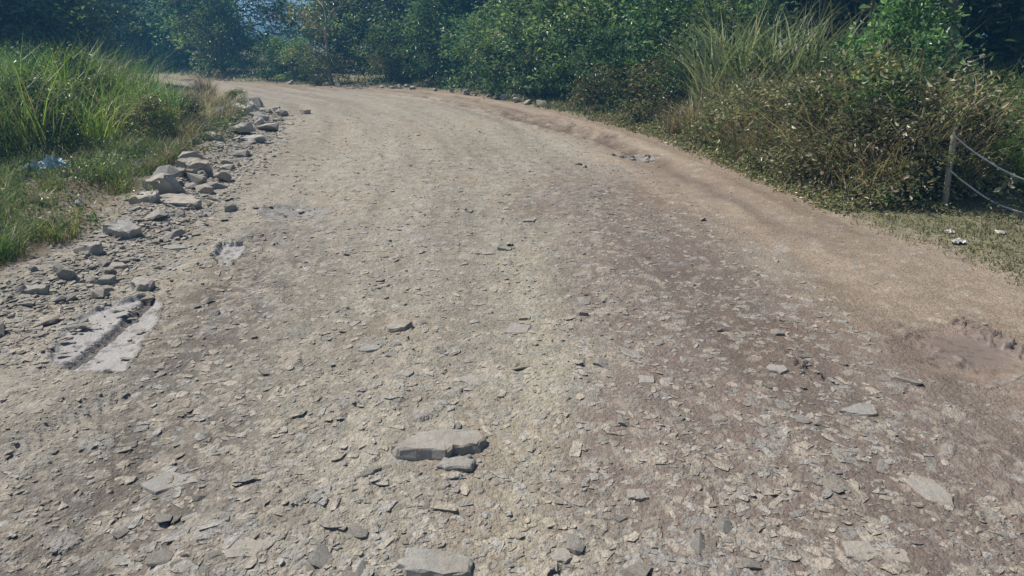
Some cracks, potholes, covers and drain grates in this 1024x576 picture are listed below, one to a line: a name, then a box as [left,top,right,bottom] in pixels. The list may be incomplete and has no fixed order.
pothole [617,155,657,163]
pothole [880,316,1024,390]
